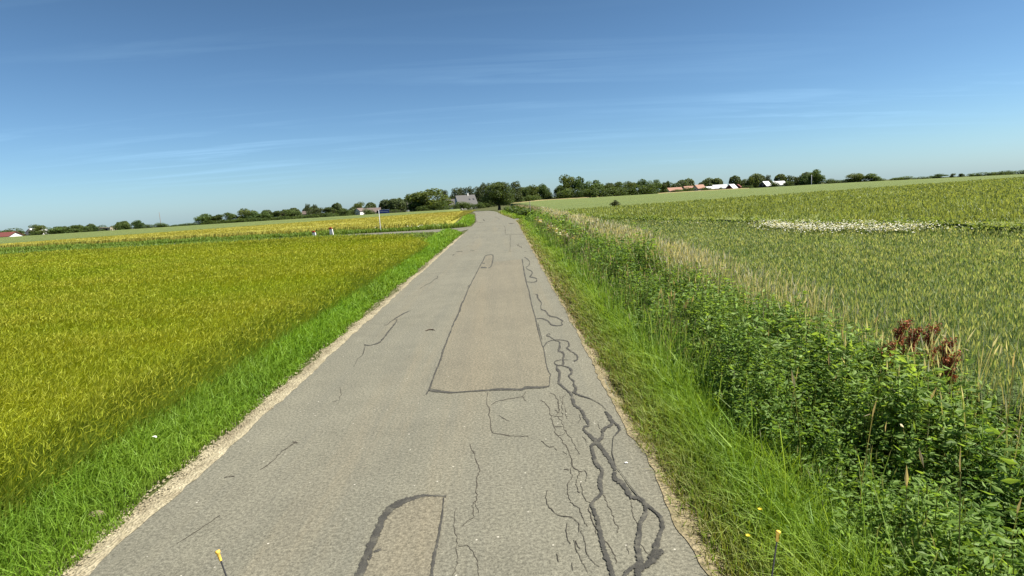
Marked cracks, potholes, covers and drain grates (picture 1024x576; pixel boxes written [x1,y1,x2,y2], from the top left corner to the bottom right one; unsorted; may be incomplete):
crack [453,392,649,575]
